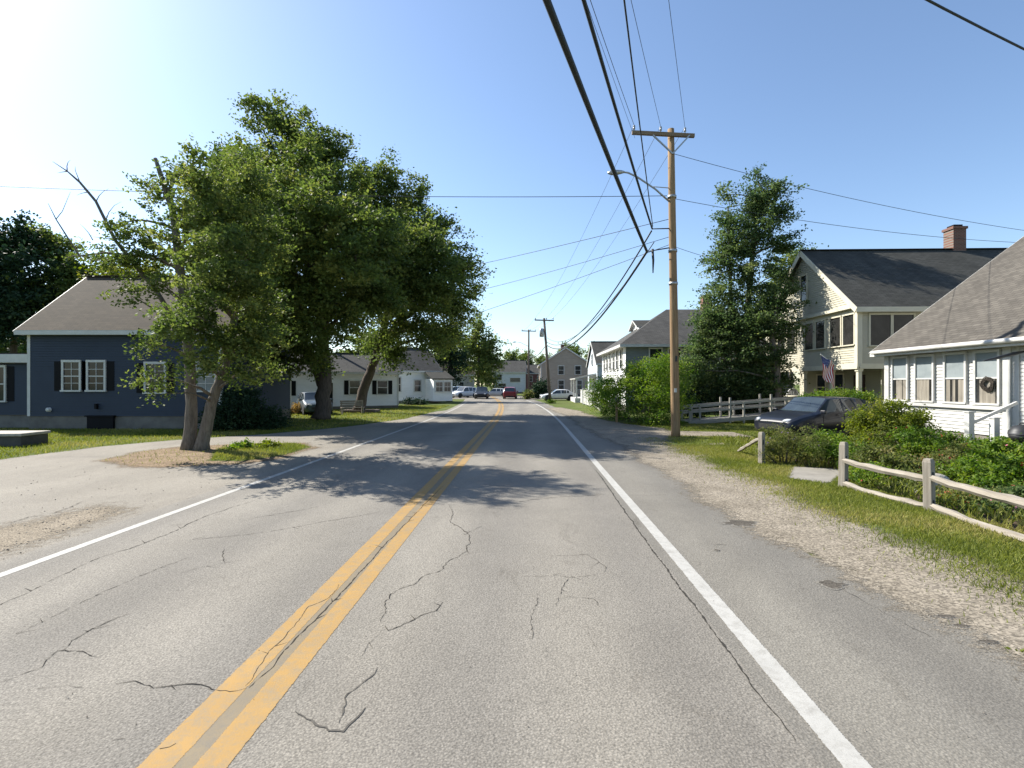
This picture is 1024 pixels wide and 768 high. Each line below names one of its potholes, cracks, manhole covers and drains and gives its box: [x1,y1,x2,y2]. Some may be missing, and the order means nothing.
crack [5,616,121,688]
crack [16,503,372,634]
crack [117,491,479,732]
